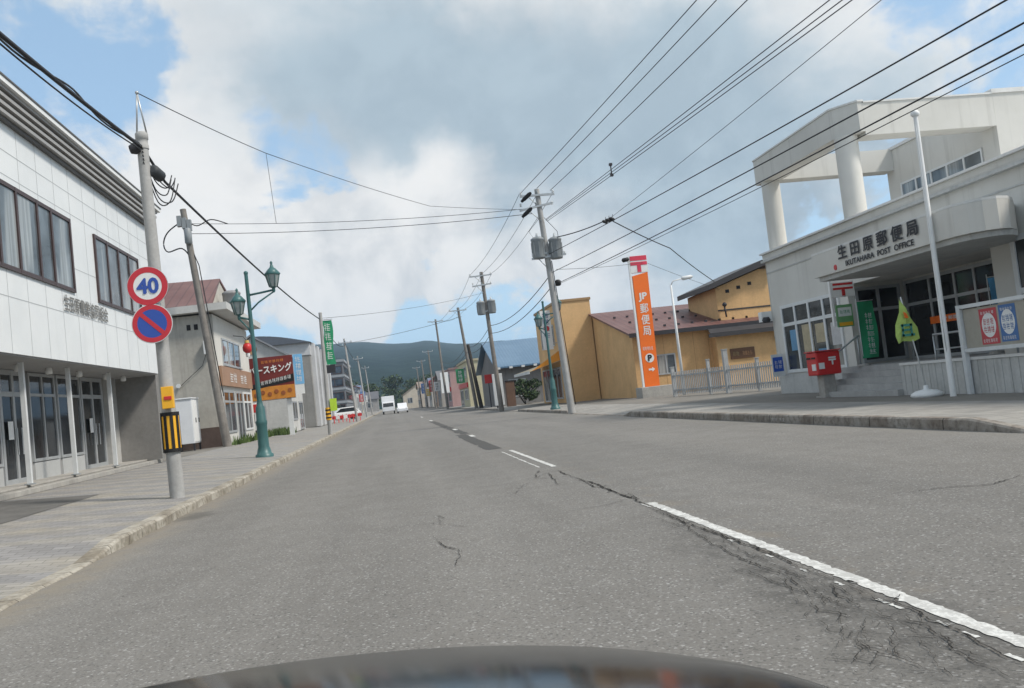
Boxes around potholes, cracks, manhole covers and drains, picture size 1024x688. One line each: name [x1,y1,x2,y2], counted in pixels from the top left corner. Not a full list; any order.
crack [650,507,1021,688]
crack [515,470,646,509]
